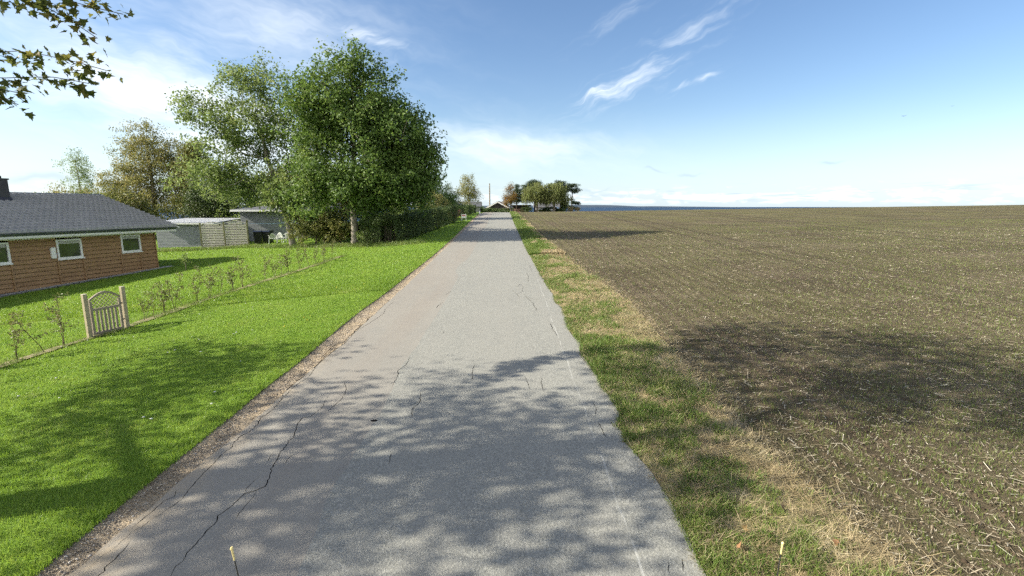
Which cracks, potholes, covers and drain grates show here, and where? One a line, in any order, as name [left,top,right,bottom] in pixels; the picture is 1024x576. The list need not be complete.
crack [90,302,393,576]
